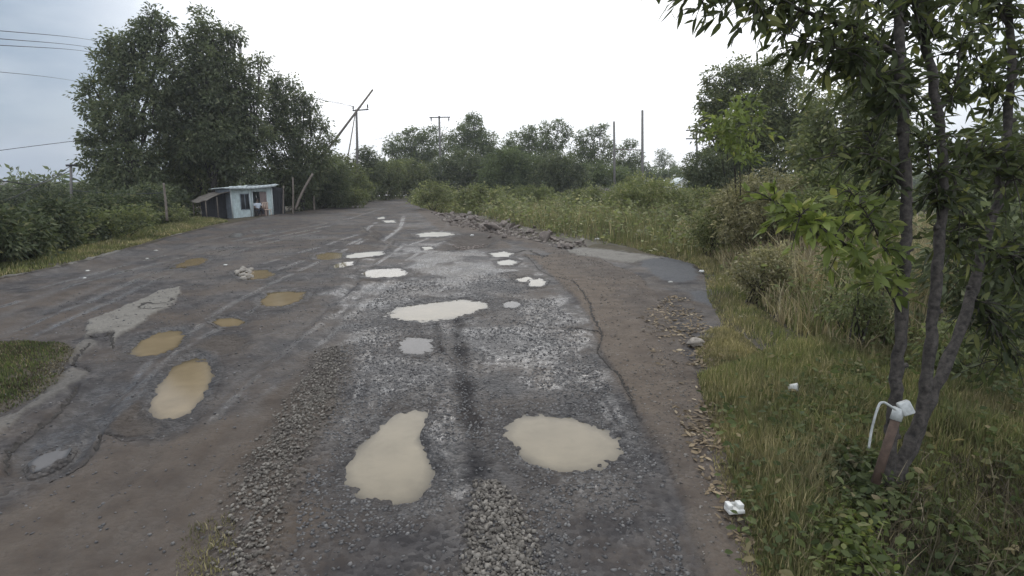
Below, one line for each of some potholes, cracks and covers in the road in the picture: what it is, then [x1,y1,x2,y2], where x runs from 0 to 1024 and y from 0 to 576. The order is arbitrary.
pothole [162,255,219,272]
pothole [116,324,196,363]
pothole [477,404,652,488]
pothole [335,249,392,260]
pothole [308,251,346,261]
pothole [206,315,252,329]
crack [515,250,642,423]
pothole [526,276,550,289]
pothole [247,287,316,312]
pothole [486,250,517,258]
pothole [132,348,225,441]
pothole [390,333,442,359]
